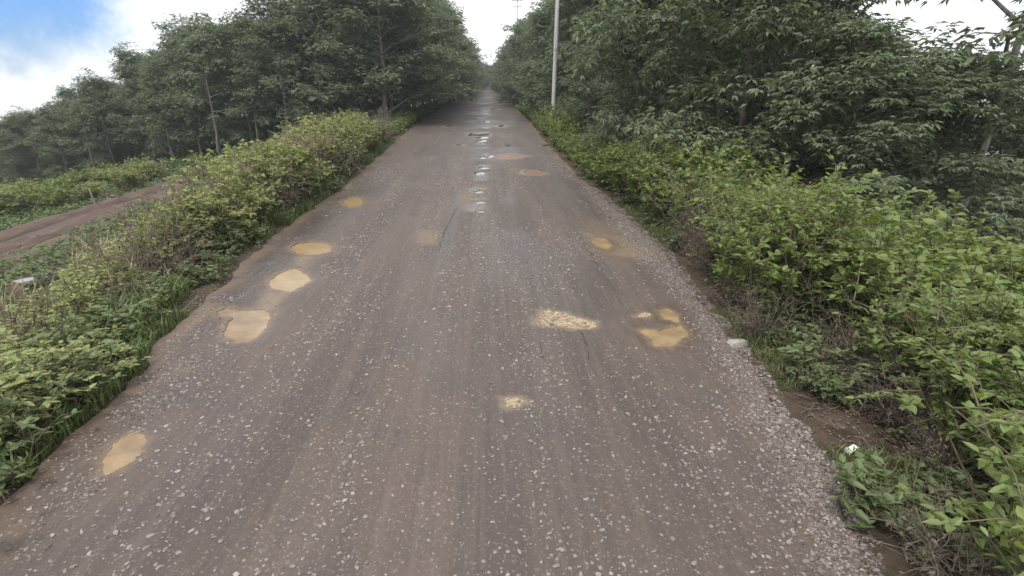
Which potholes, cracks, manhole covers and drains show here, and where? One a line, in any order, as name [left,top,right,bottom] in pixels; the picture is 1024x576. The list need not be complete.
crack [439,207,458,251]
pothole [638,325,688,347]
pothole [591,237,612,249]
pothole [268,269,311,292]
pothole [216,308,271,343]
pothole [291,242,332,255]
pothole [660,308,680,323]
pothole [534,311,596,329]
pothole [343,197,363,207]
pothole [101,432,147,475]
pothole [503,397,524,407]
